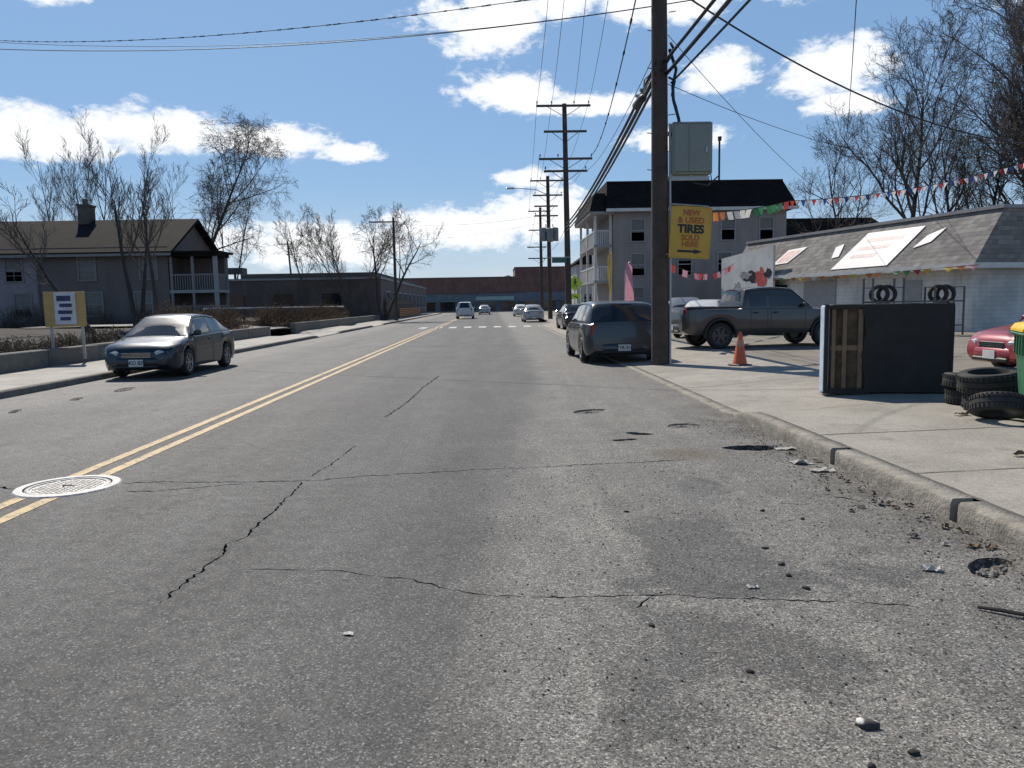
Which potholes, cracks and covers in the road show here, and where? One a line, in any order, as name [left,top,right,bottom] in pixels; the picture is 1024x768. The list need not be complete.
crack [544,594,915,608]
pothole [968,557,1017,579]
manhole cover [11,475,122,499]
crack [384,376,439,417]
crack [126,446,685,603]
